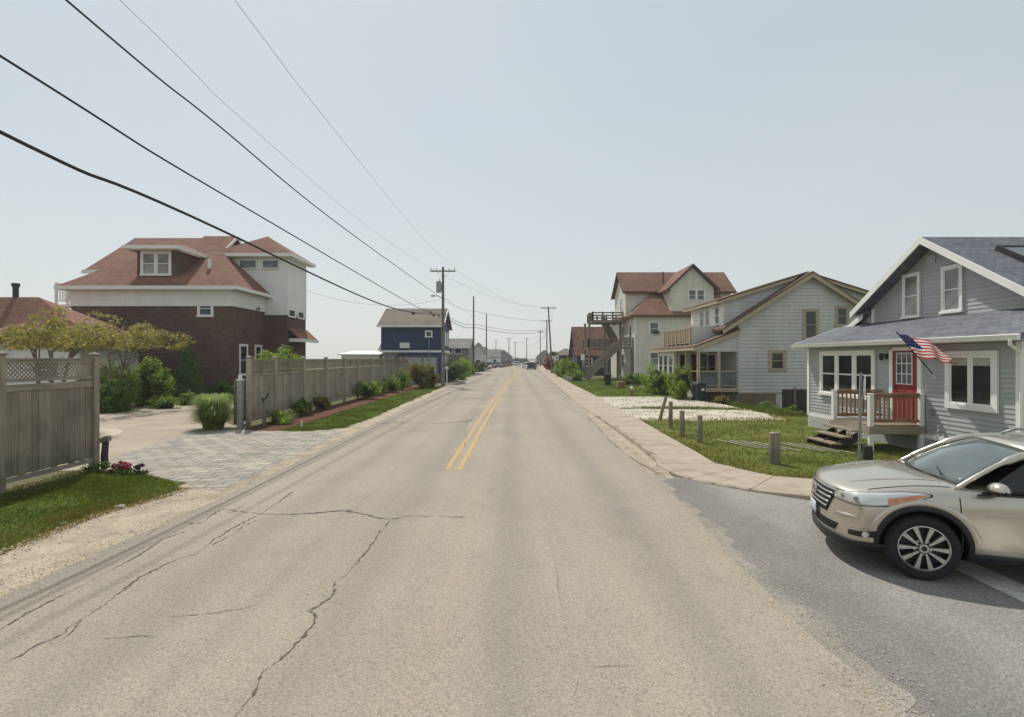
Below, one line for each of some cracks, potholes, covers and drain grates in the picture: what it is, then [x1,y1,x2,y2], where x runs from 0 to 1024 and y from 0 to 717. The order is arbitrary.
crack [0,491,455,717]
